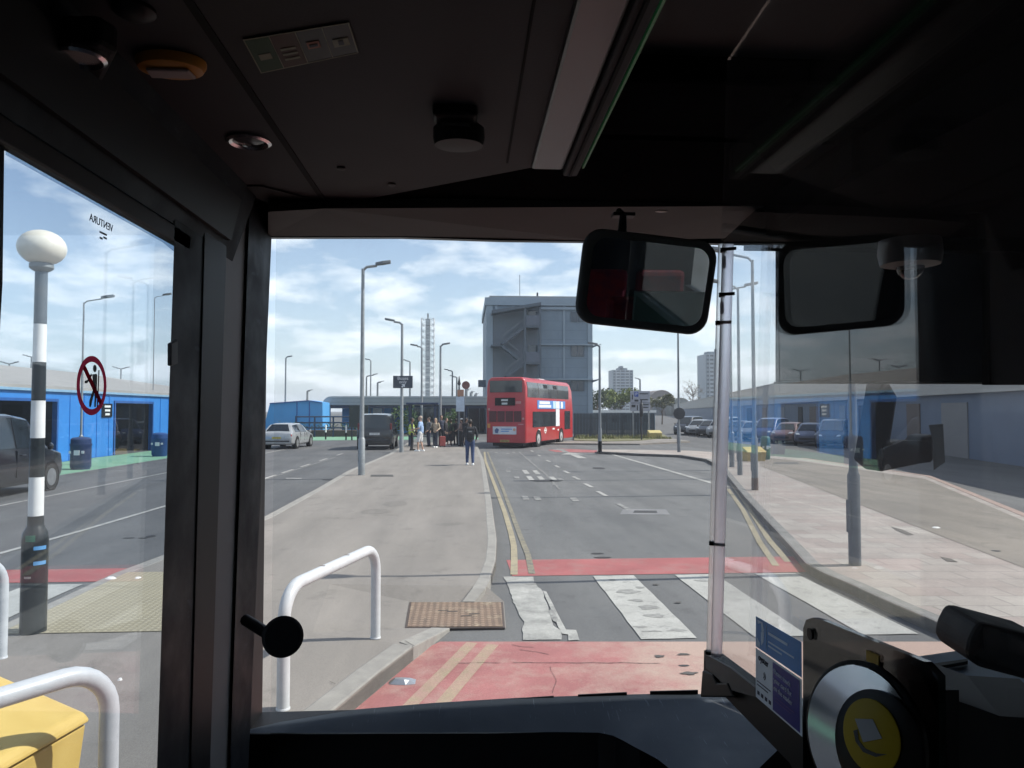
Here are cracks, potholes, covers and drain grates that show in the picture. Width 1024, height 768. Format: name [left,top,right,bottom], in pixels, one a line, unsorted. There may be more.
manhole cover [405,602,505,630]
crack [513,645,631,693]
